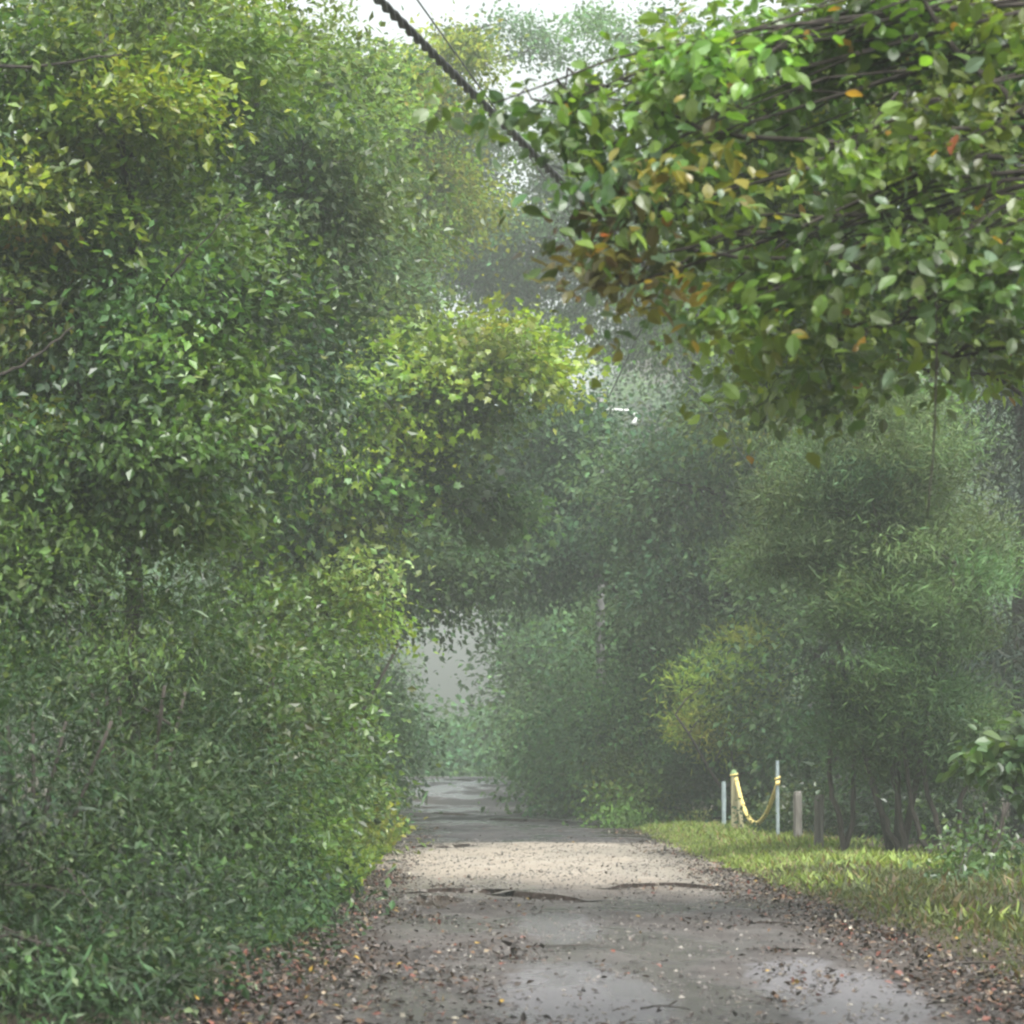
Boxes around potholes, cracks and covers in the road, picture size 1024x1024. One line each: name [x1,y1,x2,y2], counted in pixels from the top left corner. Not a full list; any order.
crack [396,882,722,902]
